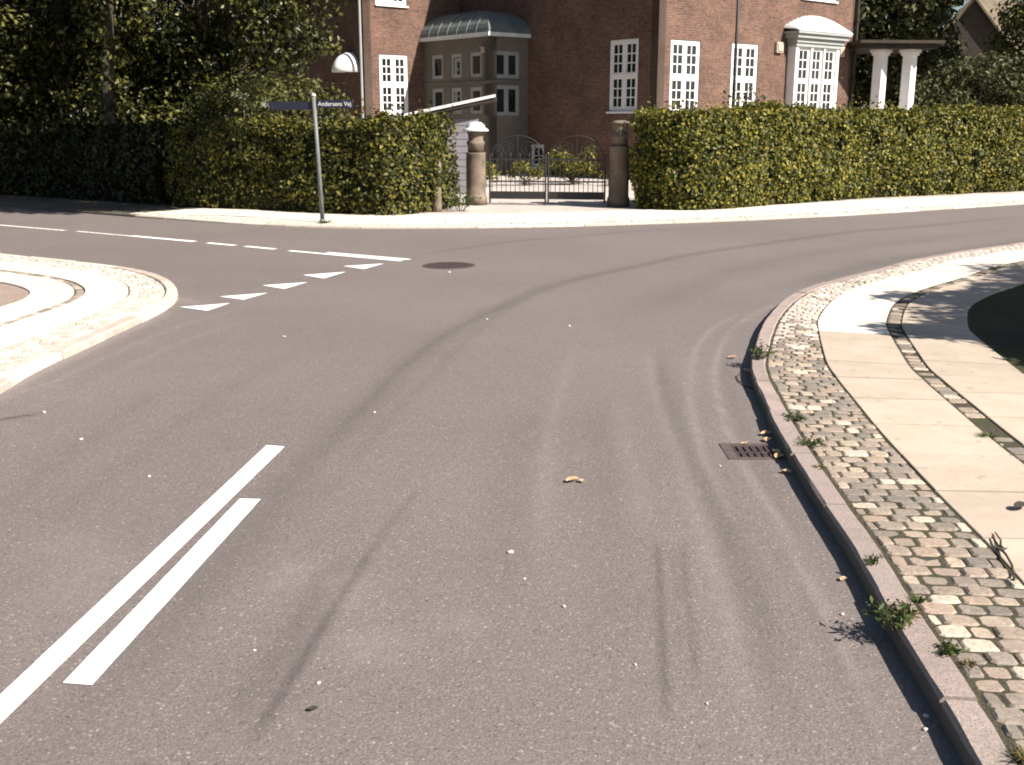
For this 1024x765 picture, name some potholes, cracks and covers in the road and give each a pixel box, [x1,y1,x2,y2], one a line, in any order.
drain grate [719,443,785,460]
